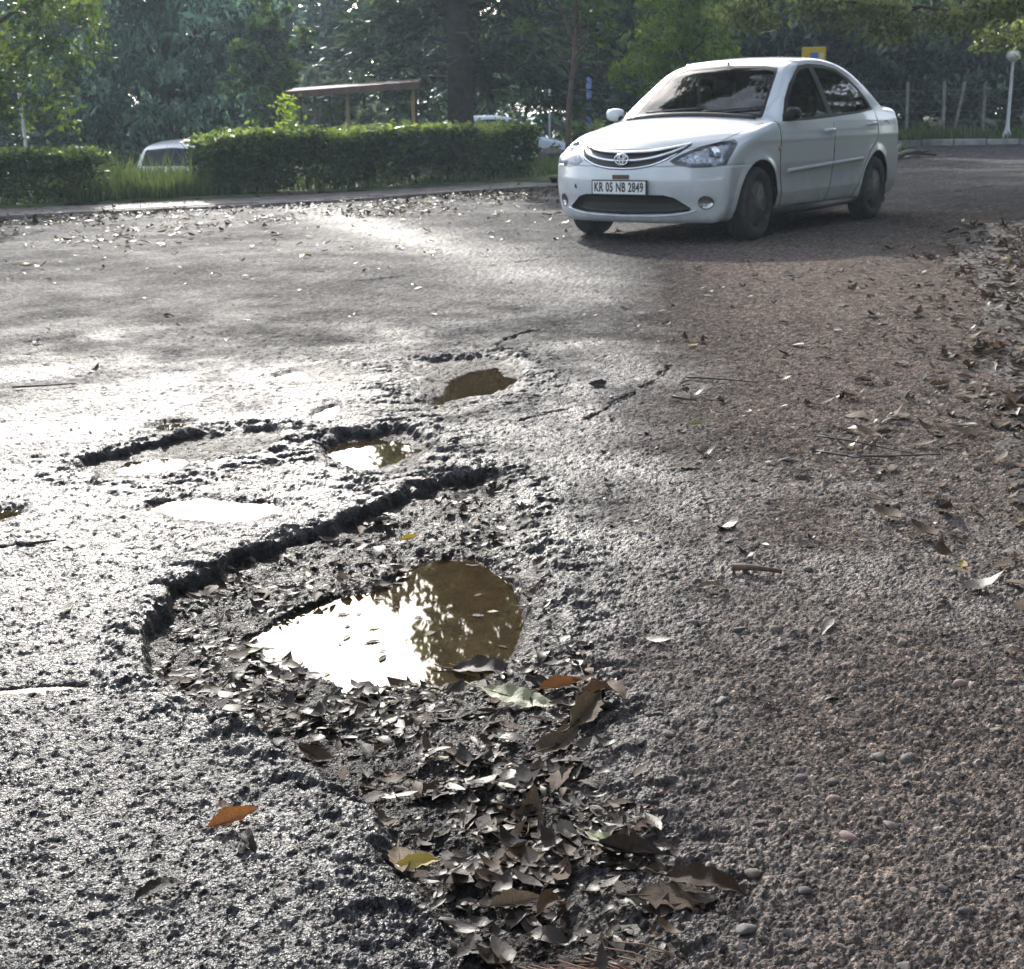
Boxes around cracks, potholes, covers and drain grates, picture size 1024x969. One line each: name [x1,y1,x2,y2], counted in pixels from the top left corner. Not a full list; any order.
pothole [64,421,293,486]
crack [519,364,676,421]
pothole [136,466,715,969]
crack [0,540,41,548]
pothole [384,351,544,414]
pothole [306,421,453,482]
